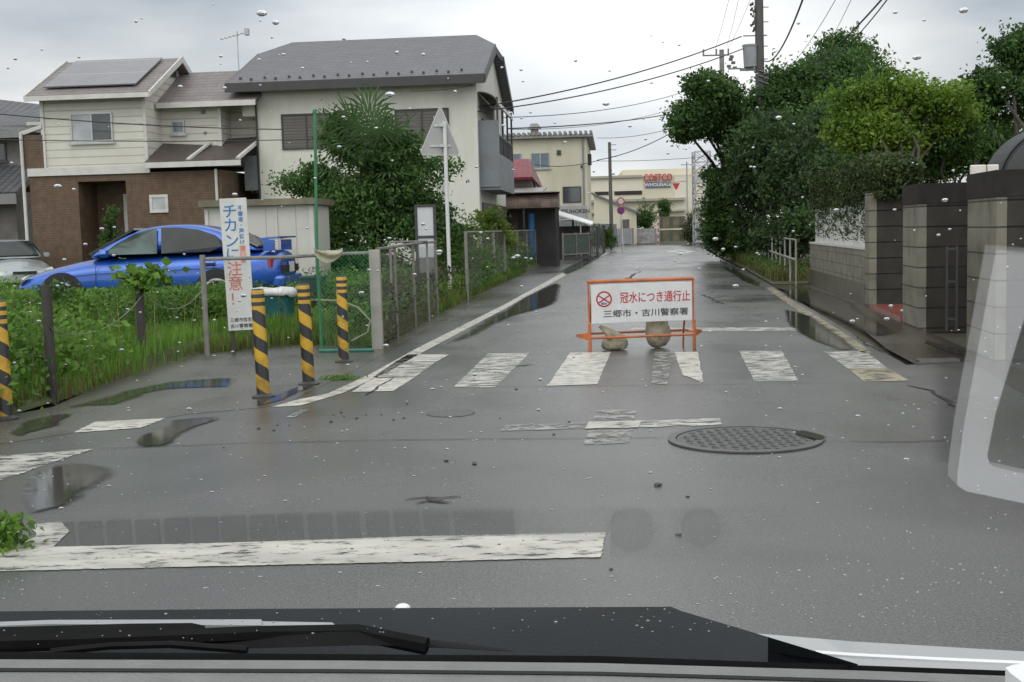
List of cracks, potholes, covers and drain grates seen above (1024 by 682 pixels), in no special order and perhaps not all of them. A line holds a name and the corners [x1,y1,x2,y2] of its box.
crack [908,385,956,407]
manhole cover [426,409,475,417]
manhole cover [668,425,824,453]
